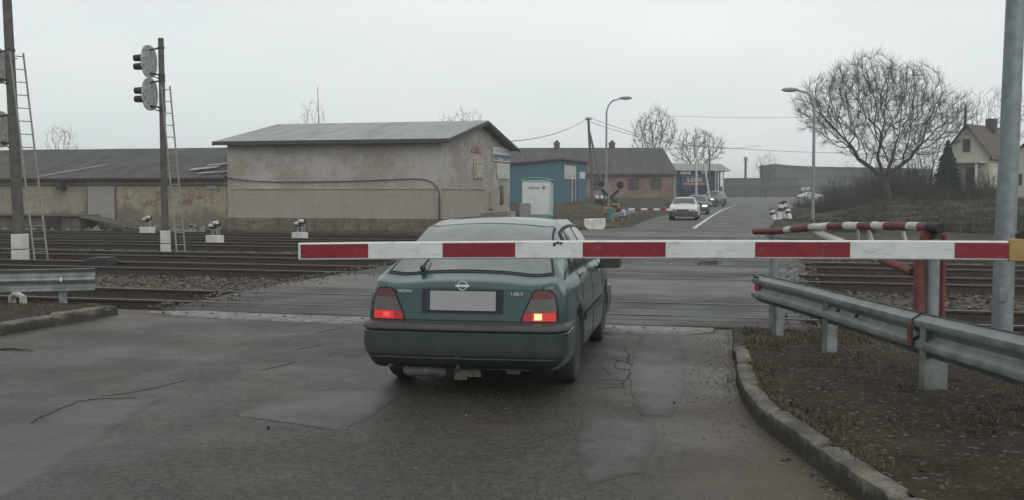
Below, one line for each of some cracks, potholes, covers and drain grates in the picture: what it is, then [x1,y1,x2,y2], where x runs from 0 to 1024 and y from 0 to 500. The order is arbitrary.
crack [0,380,184,426]
crack [596,349,636,392]
